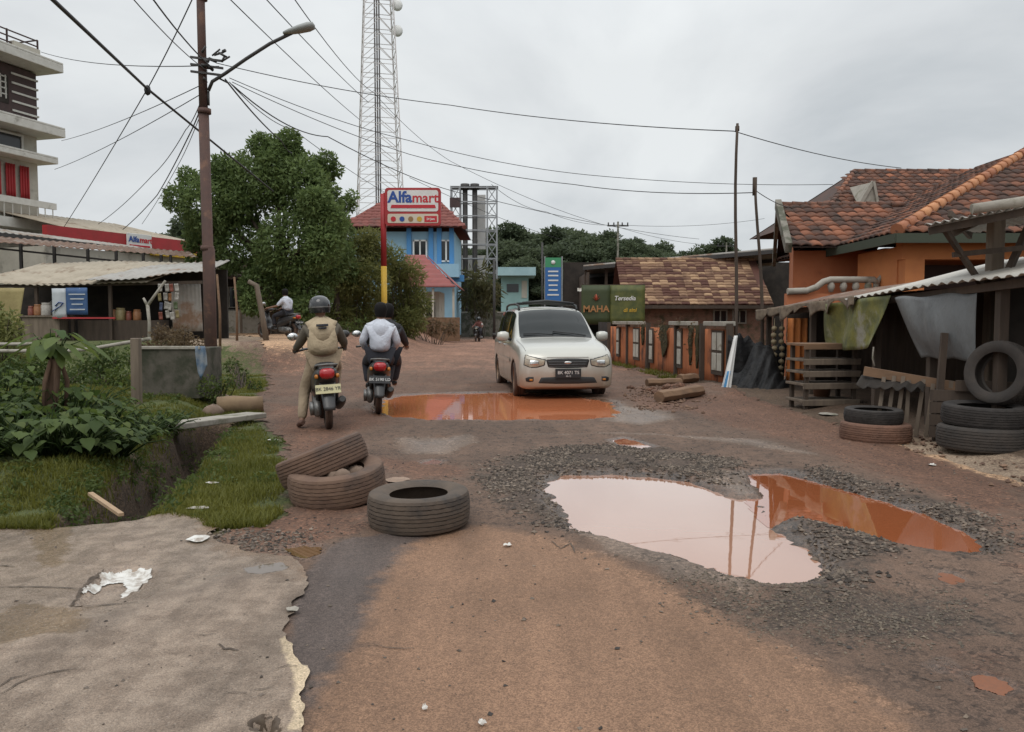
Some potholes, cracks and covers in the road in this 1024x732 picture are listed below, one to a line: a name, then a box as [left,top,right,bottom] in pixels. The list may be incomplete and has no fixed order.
pothole [609,437,655,448]
pothole [543,472,824,584]
pothole [938,573,965,585]
crack [0,668,72,694]
pothole [968,675,1013,696]
pothole [244,562,289,574]
pothole [381,392,621,420]
pothole [742,471,986,554]
